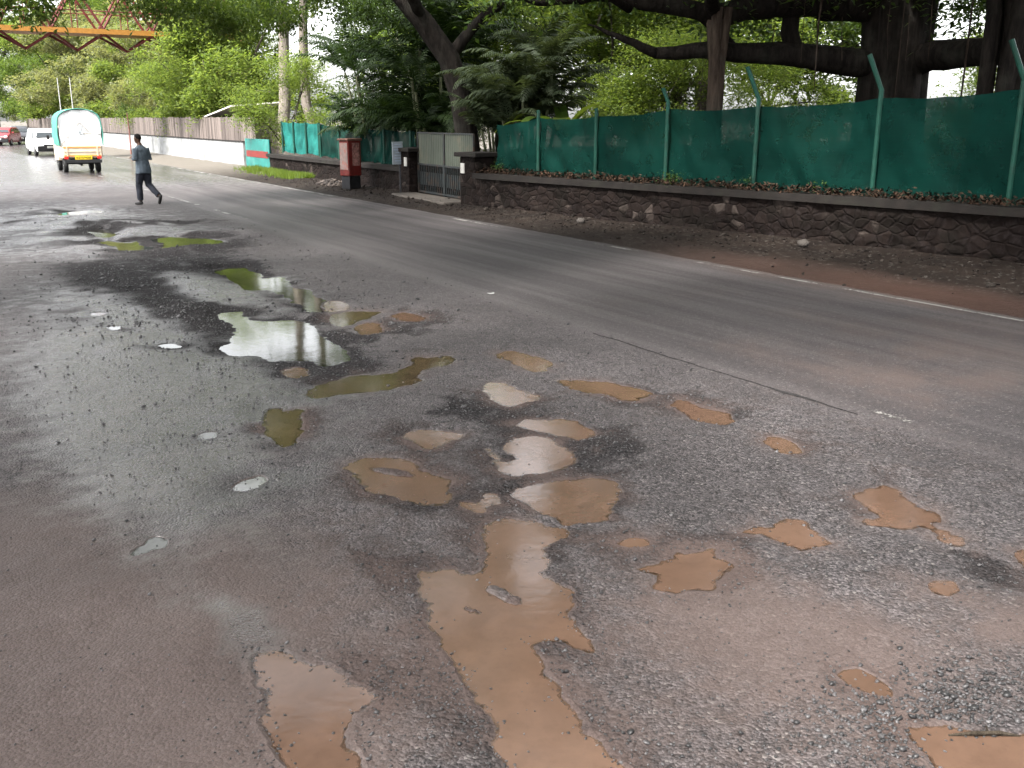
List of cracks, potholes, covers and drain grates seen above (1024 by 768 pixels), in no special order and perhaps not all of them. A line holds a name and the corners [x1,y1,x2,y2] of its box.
pothole [259,406,308,448]
pothole [507,417,599,441]
pothole [210,266,328,312]
pothole [302,354,459,399]
pothole [552,378,656,402]
pothole [836,666,895,697]
pothole [339,455,456,506]
pothole [480,434,583,477]
pothole [410,516,633,768]
pothole [902,720,1024,768]
pothole [848,482,972,547]
pothole [478,380,542,407]
